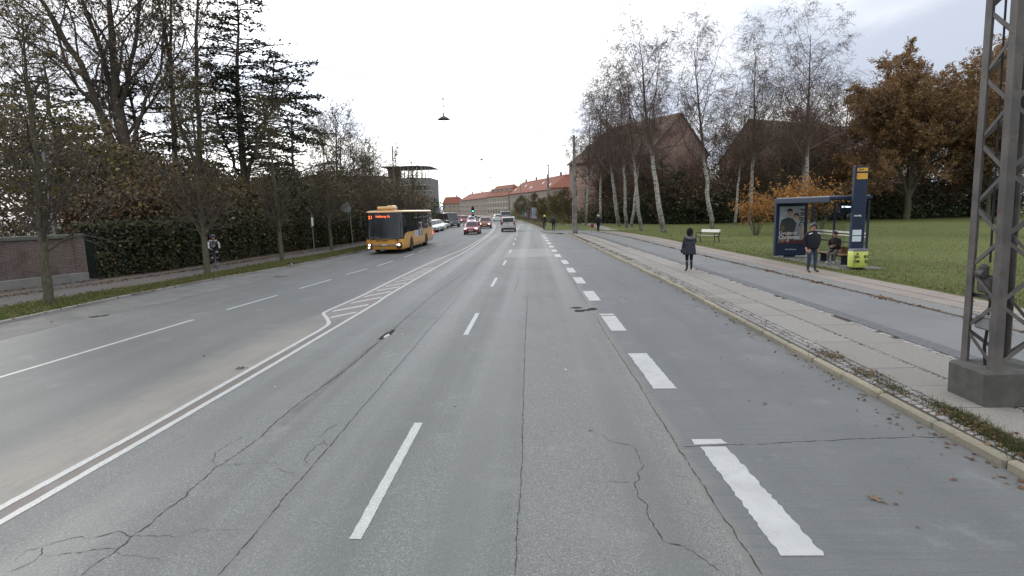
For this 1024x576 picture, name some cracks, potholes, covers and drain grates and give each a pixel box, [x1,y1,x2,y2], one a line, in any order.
crack [602,436,716,568]
pothole [364,328,407,343]
crack [11,251,495,573]
